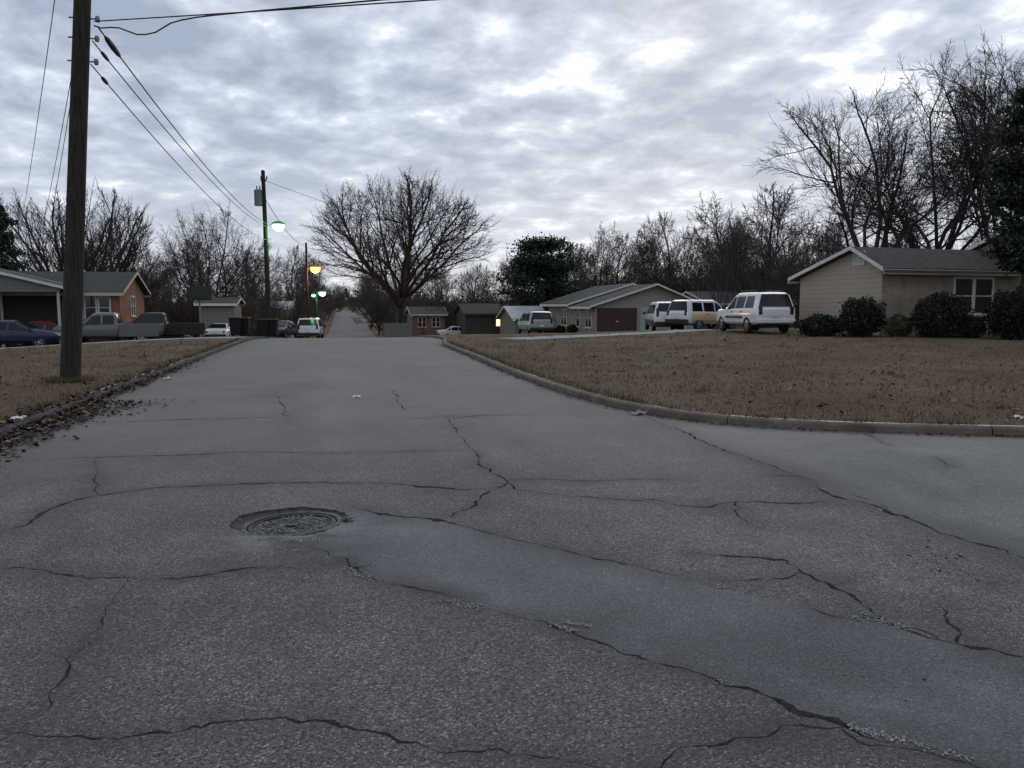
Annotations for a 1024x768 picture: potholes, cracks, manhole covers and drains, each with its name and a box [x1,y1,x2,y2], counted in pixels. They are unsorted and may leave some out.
crack [647,417,1024,559]
manhole cover [229,507,348,537]
crack [6,566,599,768]
crack [308,545,980,768]
crack [8,414,821,577]
crack [138,396,291,422]
